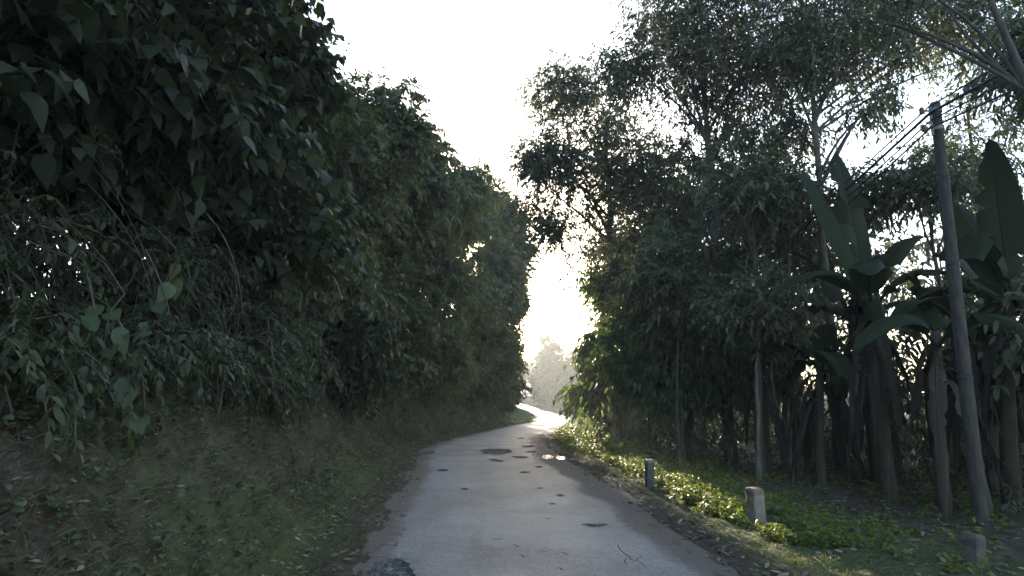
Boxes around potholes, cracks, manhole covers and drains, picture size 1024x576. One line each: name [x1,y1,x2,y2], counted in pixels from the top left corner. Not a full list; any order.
pothole [364,559,416,576]
